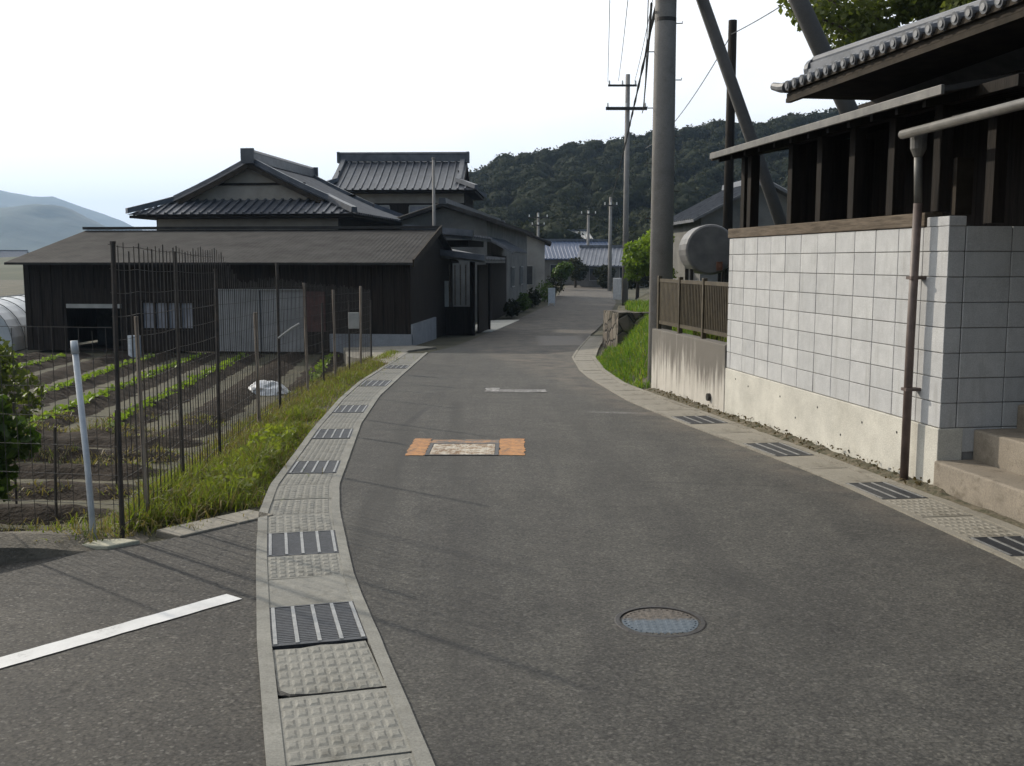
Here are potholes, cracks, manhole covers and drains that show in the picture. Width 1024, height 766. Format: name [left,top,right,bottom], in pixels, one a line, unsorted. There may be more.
manhole cover [614,606,706,638]
drain grate [287,460,341,474]
drain grate [743,442,813,457]
drain grate [267,530,339,557]
drain grate [269,601,367,650]
drain grate [968,536,1024,556]
drain grate [332,405,369,413]
drain grate [846,482,928,499]
drain grate [311,429,354,439]
manhole cover [425,443,499,456]
drain grate [671,415,727,424]
